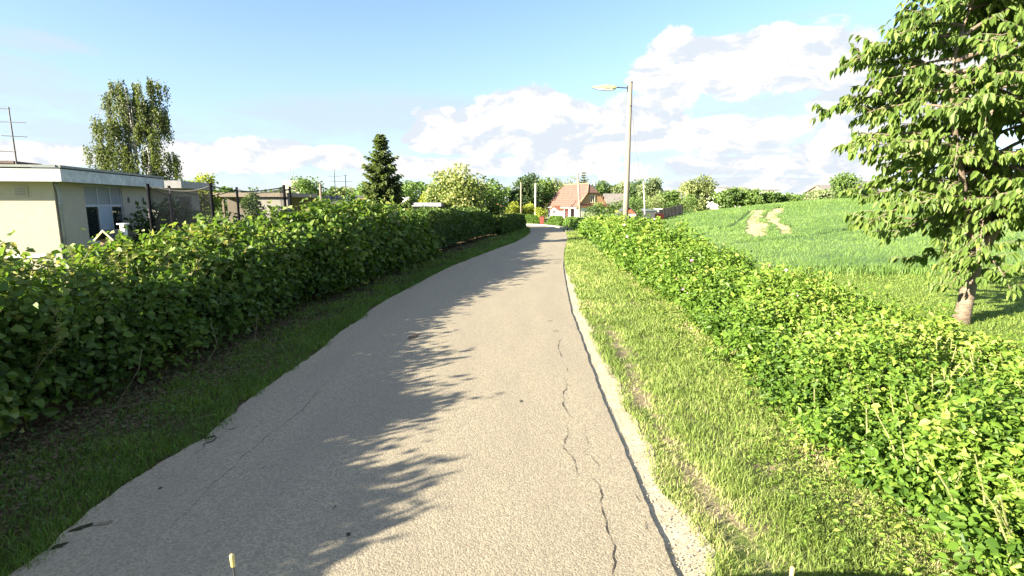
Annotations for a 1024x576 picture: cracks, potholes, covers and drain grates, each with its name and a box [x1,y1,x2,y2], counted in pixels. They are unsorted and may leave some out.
crack [562,387,599,476]
crack [598,483,616,575]
